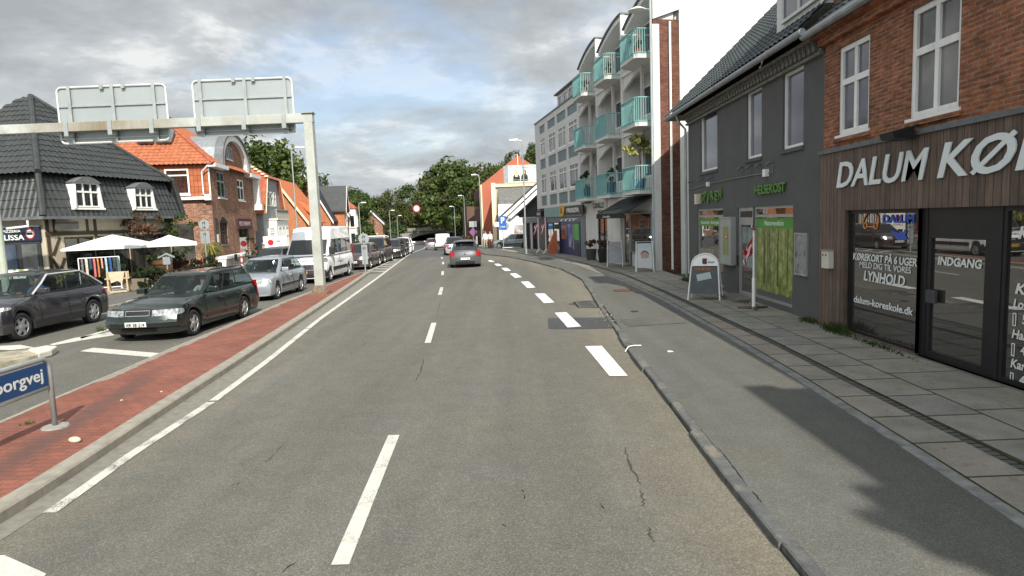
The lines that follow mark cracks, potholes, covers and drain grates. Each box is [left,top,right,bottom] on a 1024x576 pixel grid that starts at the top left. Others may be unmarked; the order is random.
crack [624,448,655,542]
